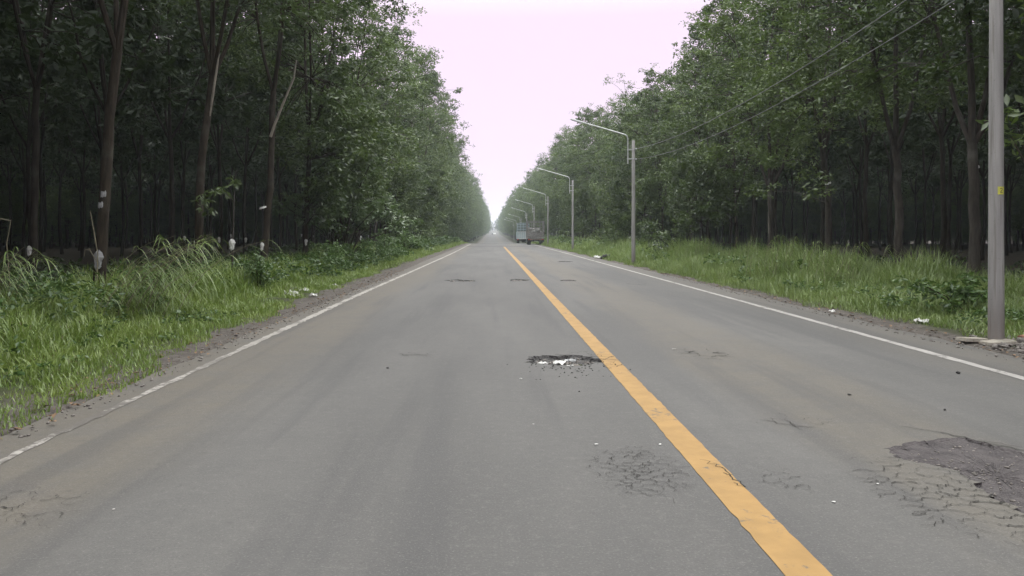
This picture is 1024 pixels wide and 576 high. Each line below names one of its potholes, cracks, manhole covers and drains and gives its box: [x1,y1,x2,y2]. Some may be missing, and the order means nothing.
crack [582,446,694,503]
crack [0,486,86,526]
crack [848,457,1024,541]
pothole [507,355,631,392]
crack [701,459,810,490]
